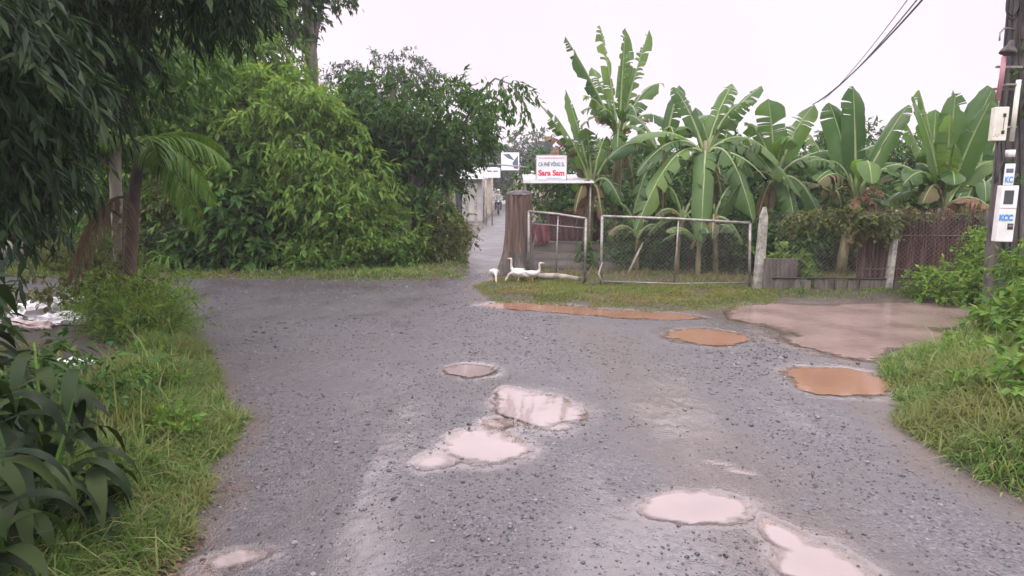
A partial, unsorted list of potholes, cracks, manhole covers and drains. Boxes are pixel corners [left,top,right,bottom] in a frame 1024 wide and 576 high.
pothole [756,514,883,576]
pothole [489,385,596,431]
pothole [635,487,761,525]
pothole [443,362,498,379]
pothole [412,416,536,470]
pothole [657,327,757,347]
pothole [776,363,905,397]
